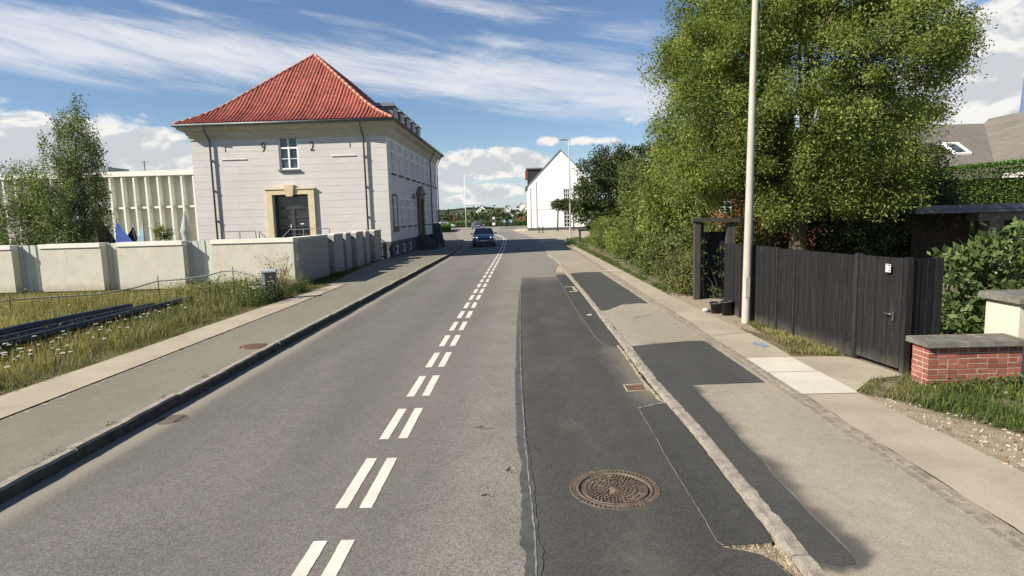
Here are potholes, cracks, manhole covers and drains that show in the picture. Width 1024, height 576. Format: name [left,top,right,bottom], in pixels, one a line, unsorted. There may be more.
drain grate [623,383,649,392]
manhole cover [570,469,660,510]
